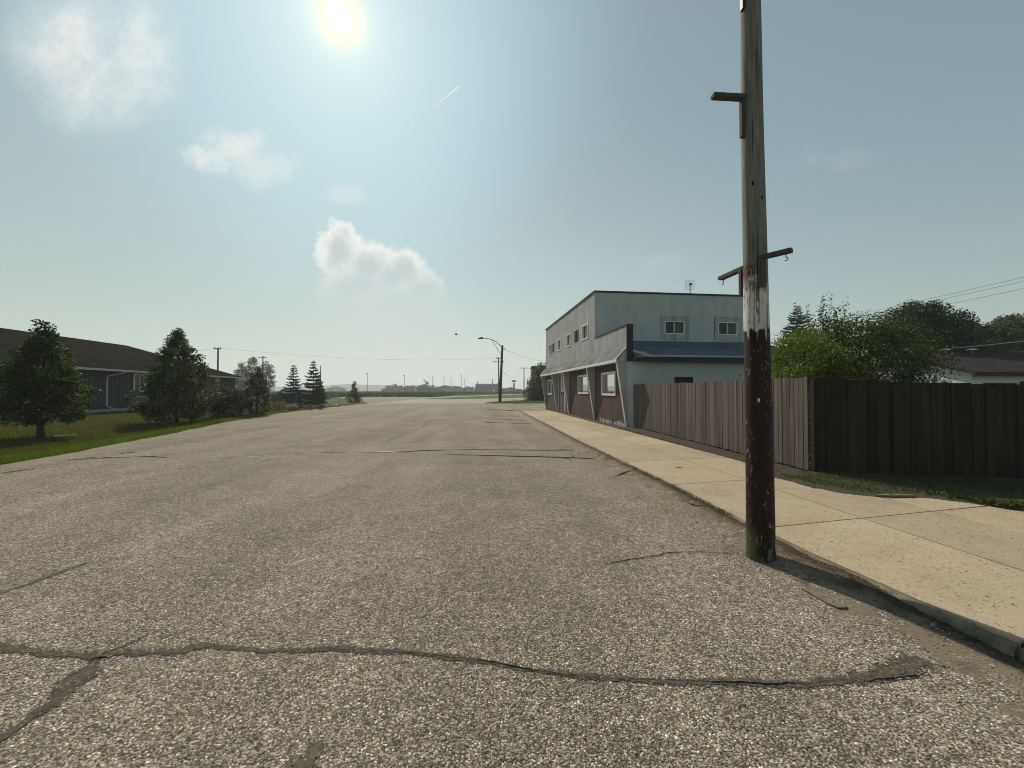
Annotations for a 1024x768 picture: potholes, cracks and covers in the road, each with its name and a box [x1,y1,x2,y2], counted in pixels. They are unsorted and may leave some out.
crack [605,551,721,564]
